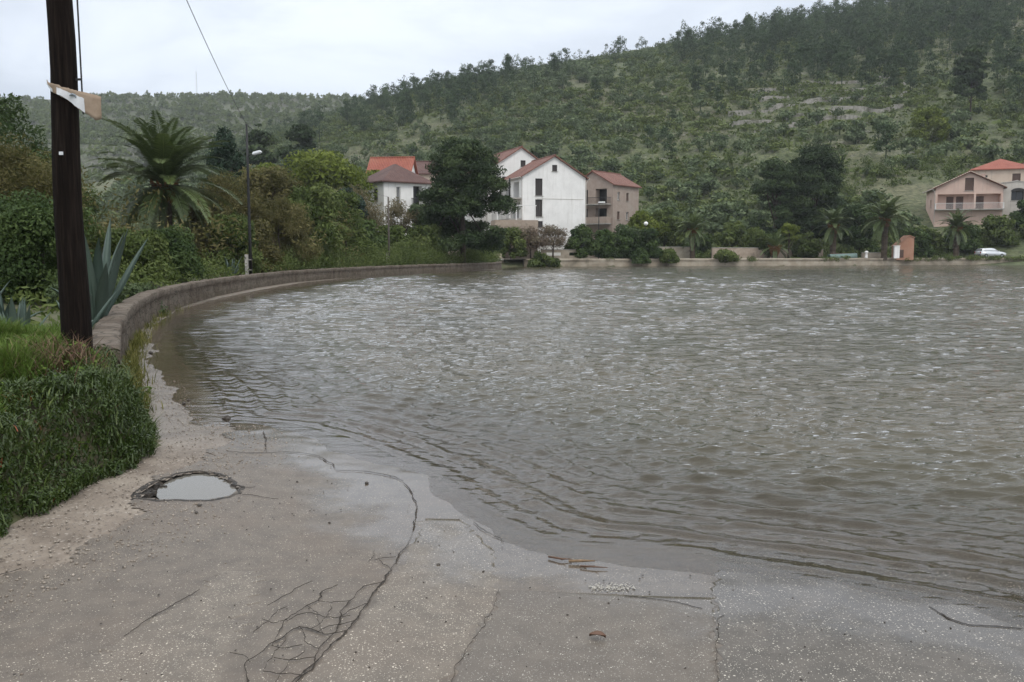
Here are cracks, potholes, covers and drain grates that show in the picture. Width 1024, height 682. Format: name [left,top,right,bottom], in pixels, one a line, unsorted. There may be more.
crack [126,589,200,635]
crack [929,606,1022,629]
crack [230,431,418,682]
pothole [130,470,245,502]
